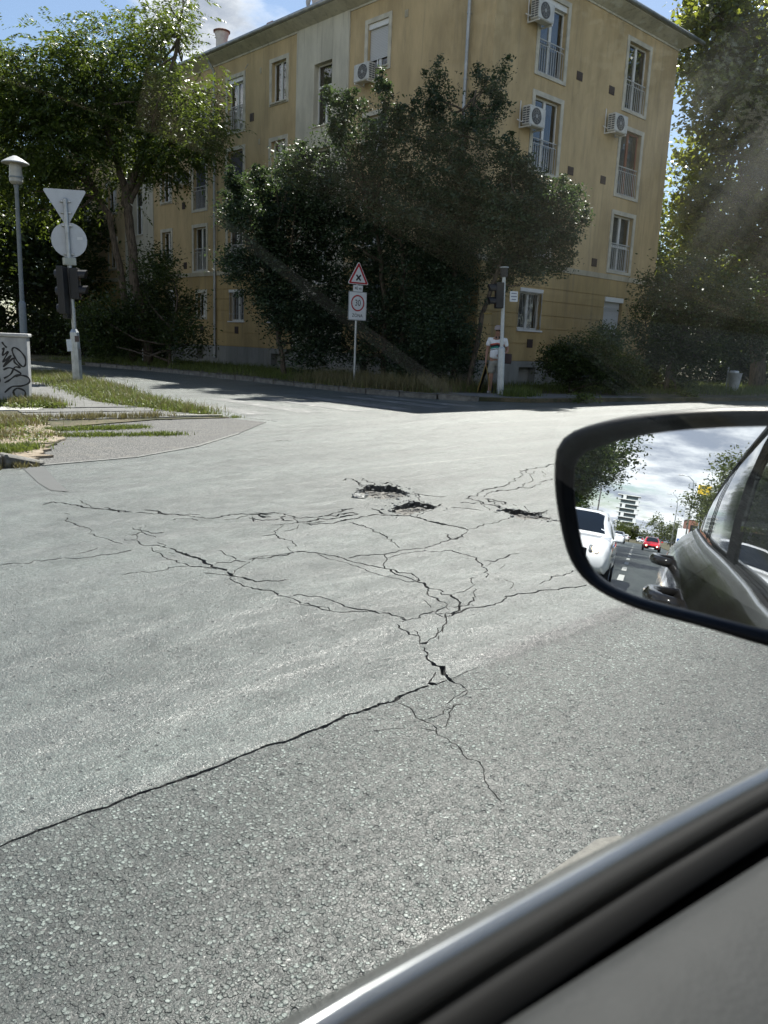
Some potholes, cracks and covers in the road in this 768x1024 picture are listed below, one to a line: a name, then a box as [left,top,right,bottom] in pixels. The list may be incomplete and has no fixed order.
pothole [501,509,550,520]
crack [3,464,586,801]
pothole [355,485,406,499]
pothole [391,500,438,515]
